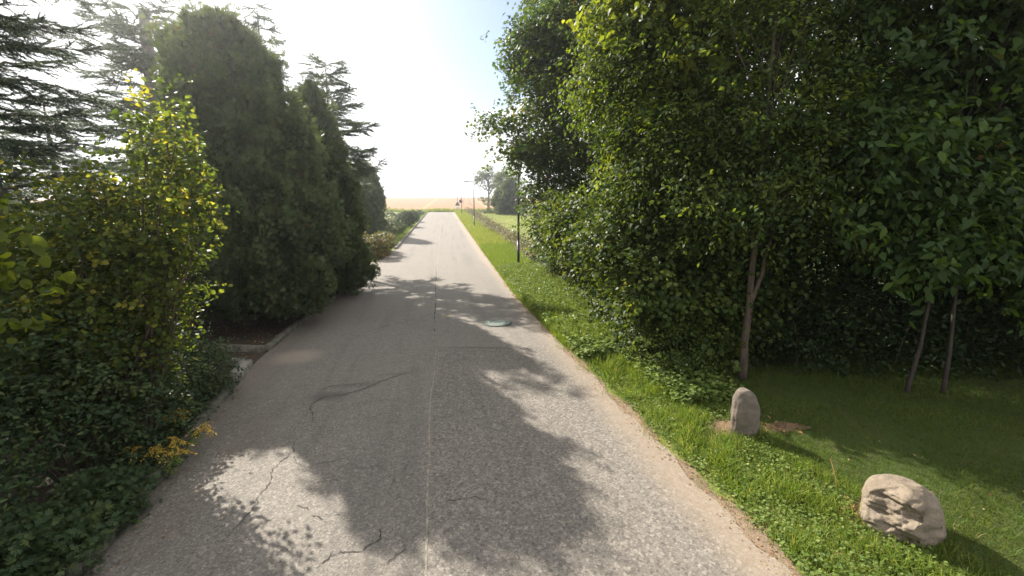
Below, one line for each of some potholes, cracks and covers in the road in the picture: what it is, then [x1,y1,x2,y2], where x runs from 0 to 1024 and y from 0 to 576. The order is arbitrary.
crack [216,437,302,544]
manhole cover [482,319,512,327]
crack [310,370,416,423]
crack [317,526,405,567]
